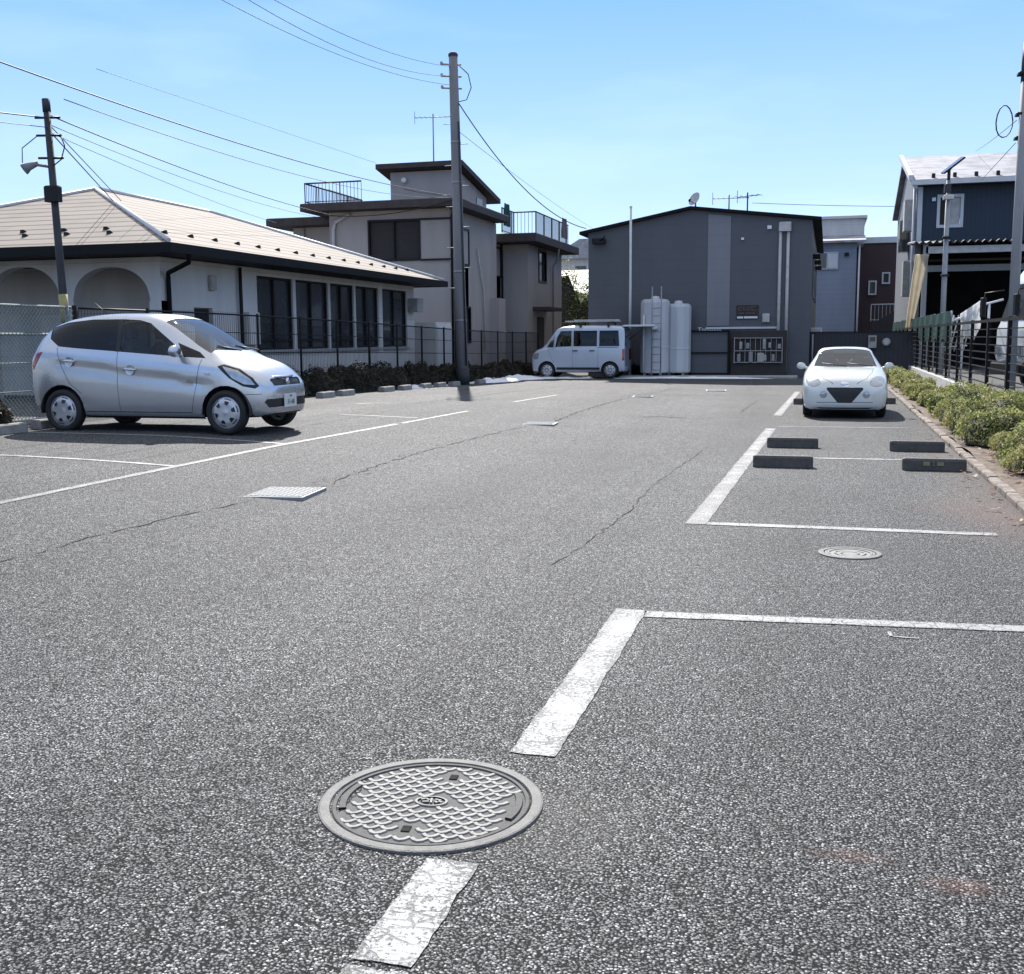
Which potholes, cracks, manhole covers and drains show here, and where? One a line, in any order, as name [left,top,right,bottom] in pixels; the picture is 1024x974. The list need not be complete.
manhole cover [818,547,882,560]
manhole cover [318,758,544,855]
crack [318,426,526,487]
crack [543,450,702,569]
crack [0,500,251,562]
